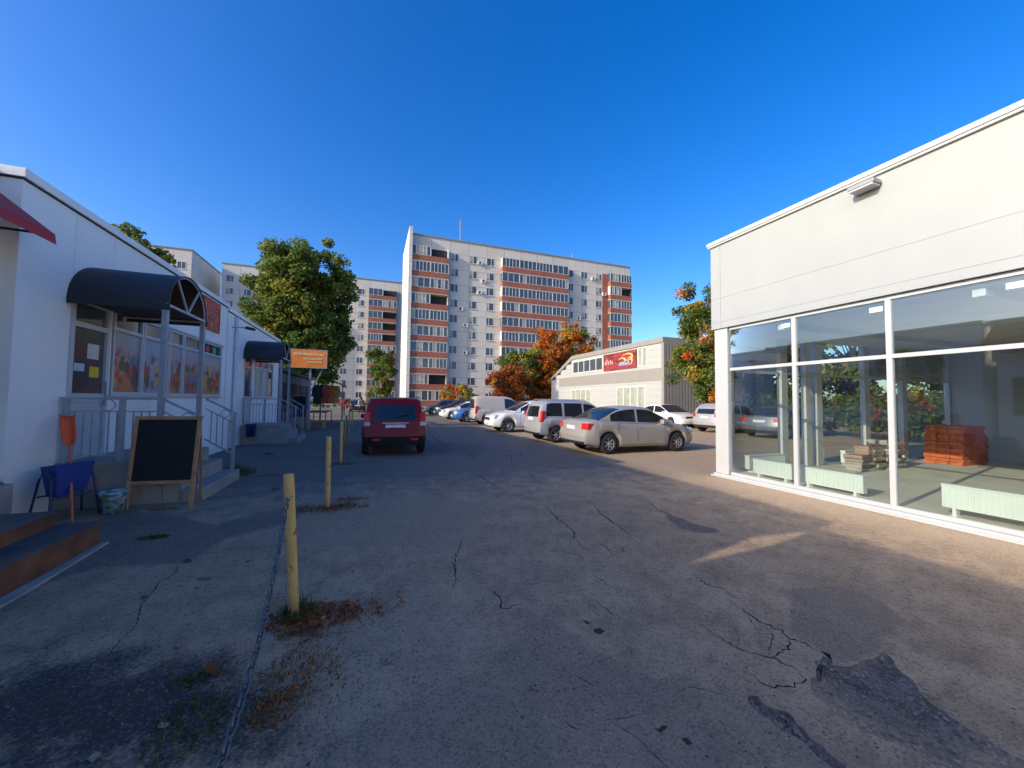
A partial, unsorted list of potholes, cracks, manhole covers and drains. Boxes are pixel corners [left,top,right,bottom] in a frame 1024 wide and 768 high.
crack [567,712,668,768]
pothole [808,651,1024,768]
crack [97,560,186,669]
crack [676,574,832,700]
pothole [748,695,846,768]
crack [544,505,642,559]
